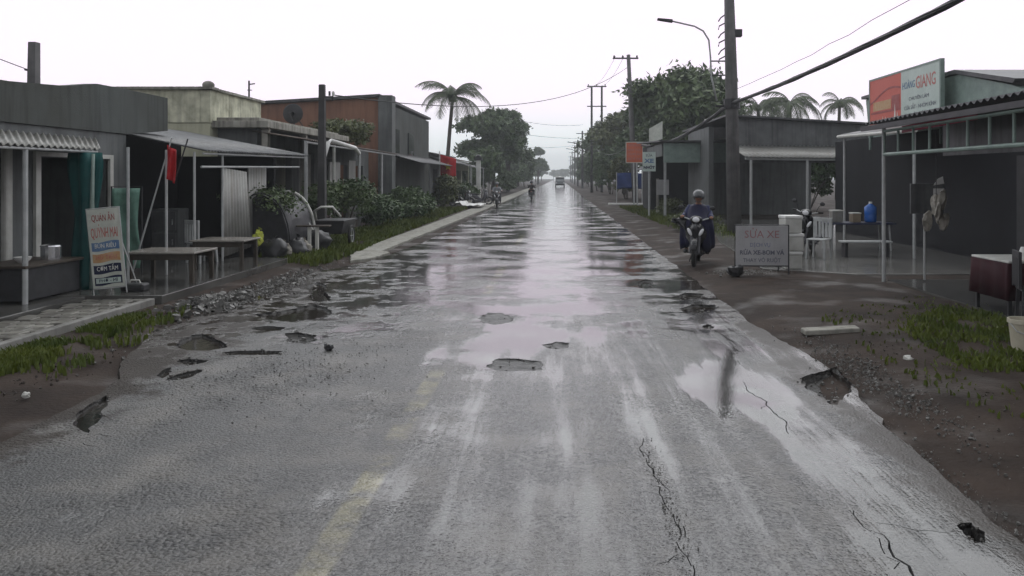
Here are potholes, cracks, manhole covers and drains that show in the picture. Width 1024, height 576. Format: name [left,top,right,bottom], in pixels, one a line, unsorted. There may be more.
pothole [177,356,208,365]
crack [639,440,695,576]
pothole [255,303,332,323]
pothole [166,369,202,381]
crack [854,515,954,576]
crack [744,383,789,434]
pothole [486,358,543,371]
pothole [956,522,985,543]
pothole [478,313,514,325]
pothole [285,331,316,344]
pothole [73,395,111,435]
pothole [797,367,853,404]
